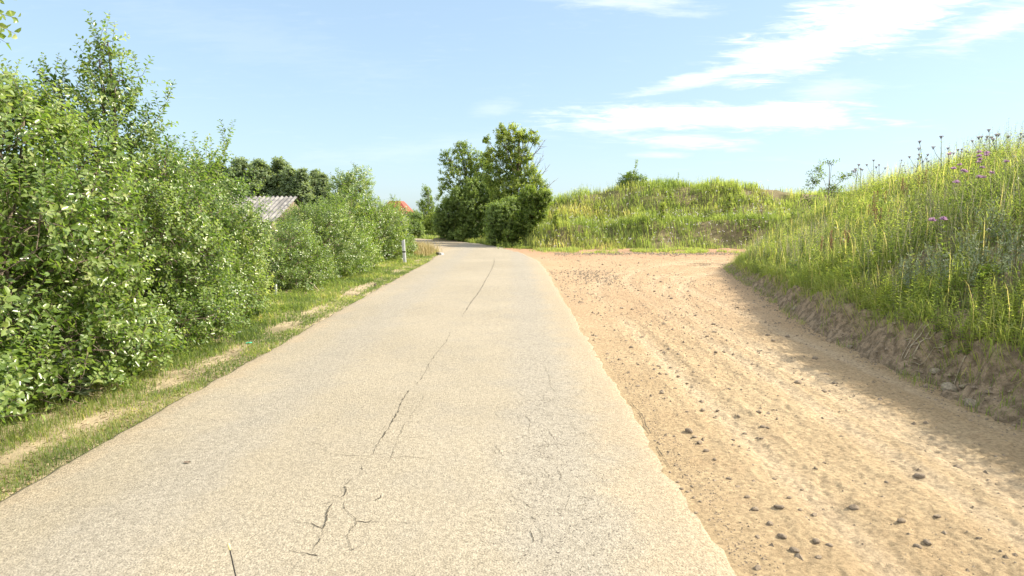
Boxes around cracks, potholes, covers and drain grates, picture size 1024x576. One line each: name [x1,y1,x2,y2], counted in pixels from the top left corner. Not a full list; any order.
crack [290,342,446,562]
crack [480,397,614,542]
